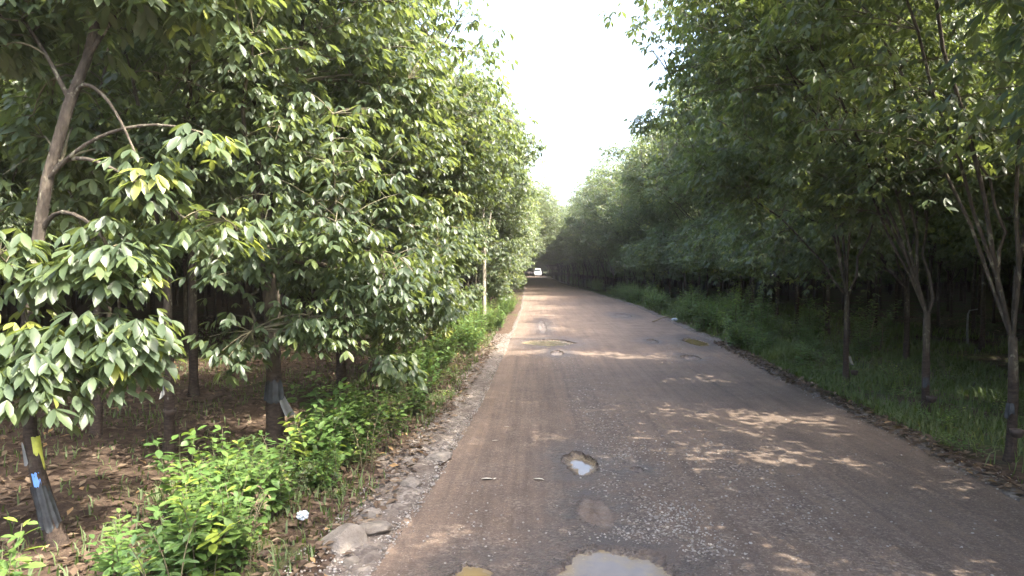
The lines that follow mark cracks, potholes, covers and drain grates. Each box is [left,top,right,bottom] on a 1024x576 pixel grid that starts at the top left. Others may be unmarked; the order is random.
pothole [545,544,681,576]
pothole [446,563,495,576]
pothole [682,337,711,346]
pothole [560,450,599,479]
